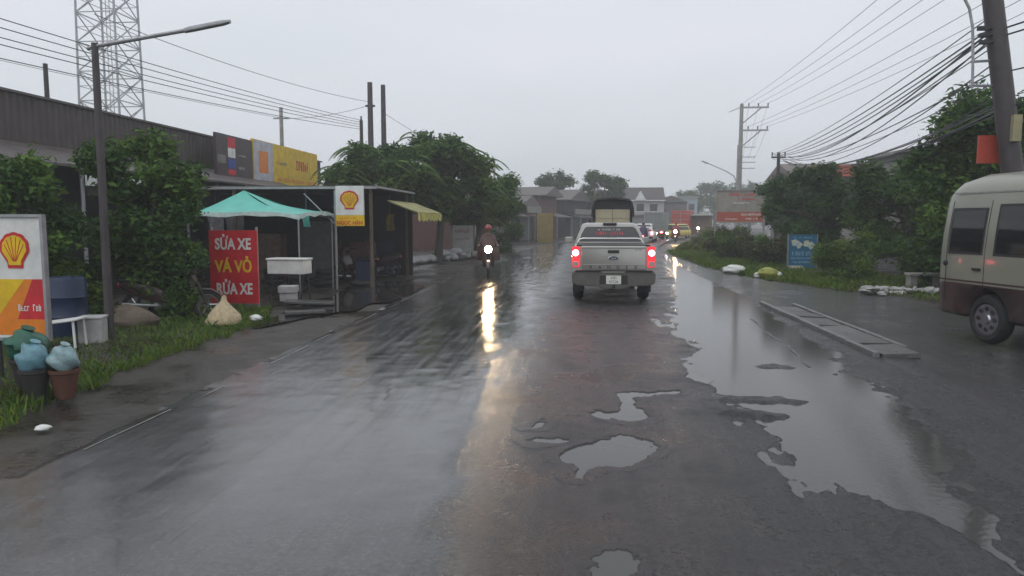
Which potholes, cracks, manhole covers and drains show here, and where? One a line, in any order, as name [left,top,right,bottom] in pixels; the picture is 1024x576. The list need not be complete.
pothole [511,432,585,450]
pothole [572,388,692,426]
pothole [538,429,674,486]
pothole [562,540,656,576]
pothole [513,415,559,432]
